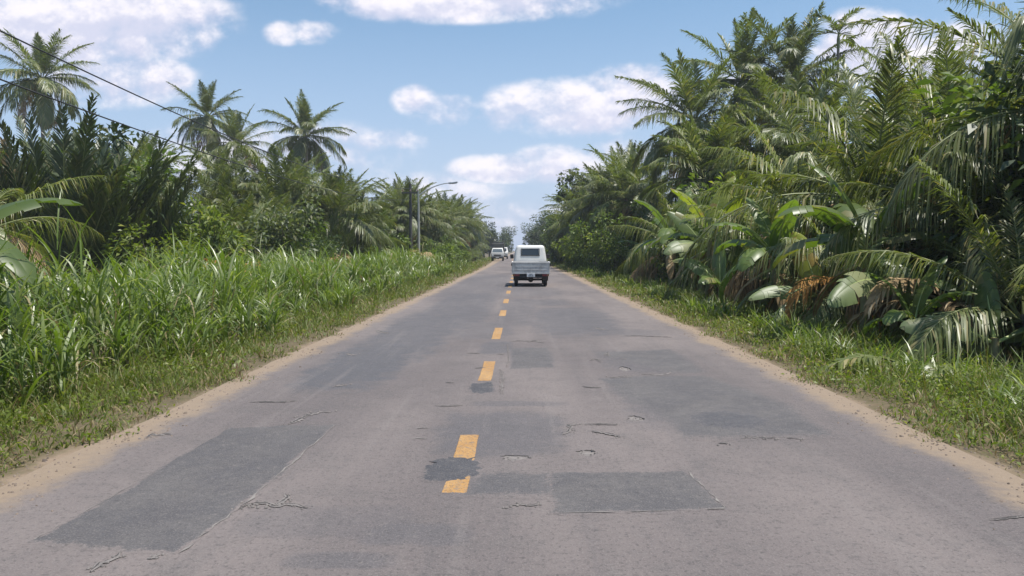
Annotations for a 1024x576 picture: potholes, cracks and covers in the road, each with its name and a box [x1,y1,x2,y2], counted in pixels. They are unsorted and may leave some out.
crack [86,551,127,576]
crack [562,423,625,438]
crack [231,493,313,510]
crack [255,401,337,426]
pothole [502,453,533,461]
